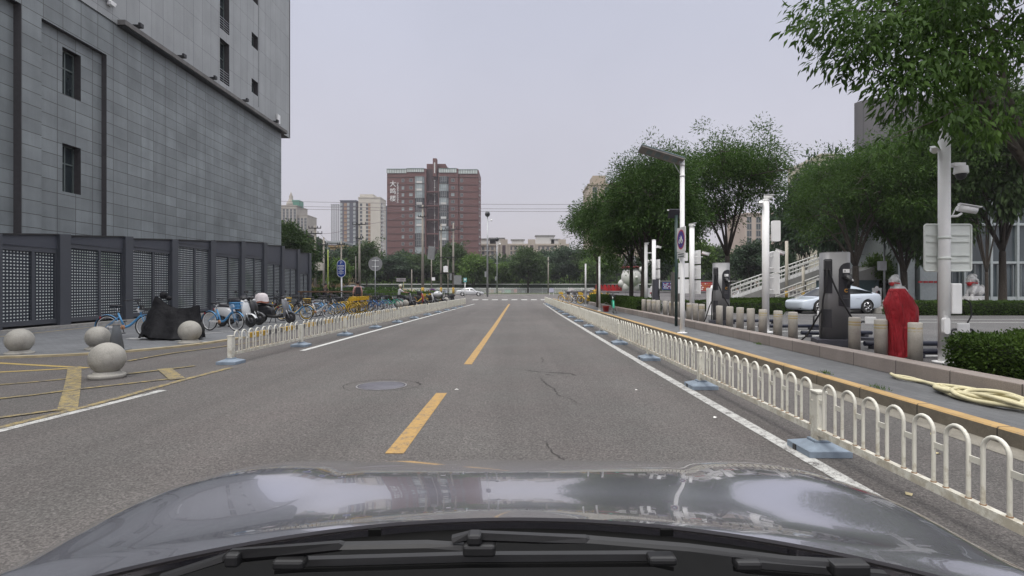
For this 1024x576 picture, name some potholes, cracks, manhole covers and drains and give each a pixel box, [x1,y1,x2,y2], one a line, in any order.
manhole cover [356,381,407,390]
